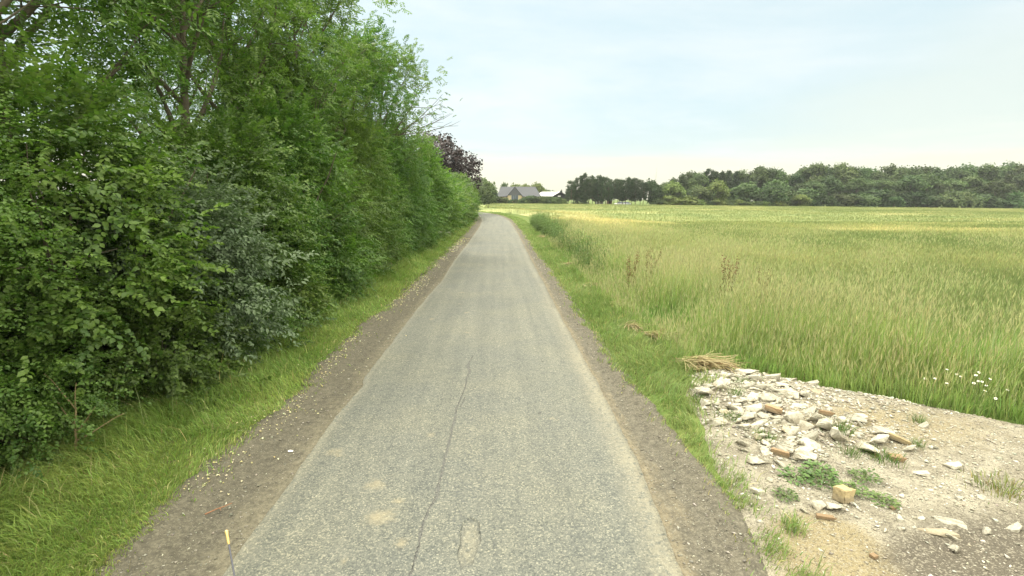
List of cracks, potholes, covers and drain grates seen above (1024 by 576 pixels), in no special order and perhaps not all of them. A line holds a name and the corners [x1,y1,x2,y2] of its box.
pothole [457,517,482,570]
crack [409,356,473,576]
